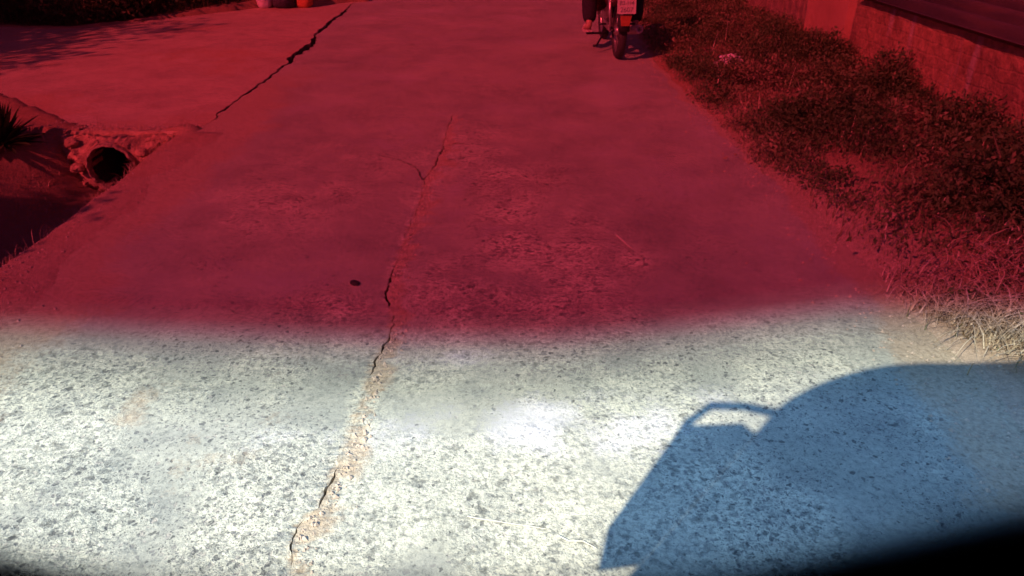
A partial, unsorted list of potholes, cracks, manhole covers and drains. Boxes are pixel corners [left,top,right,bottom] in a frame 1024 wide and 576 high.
crack [290,347,384,562]
